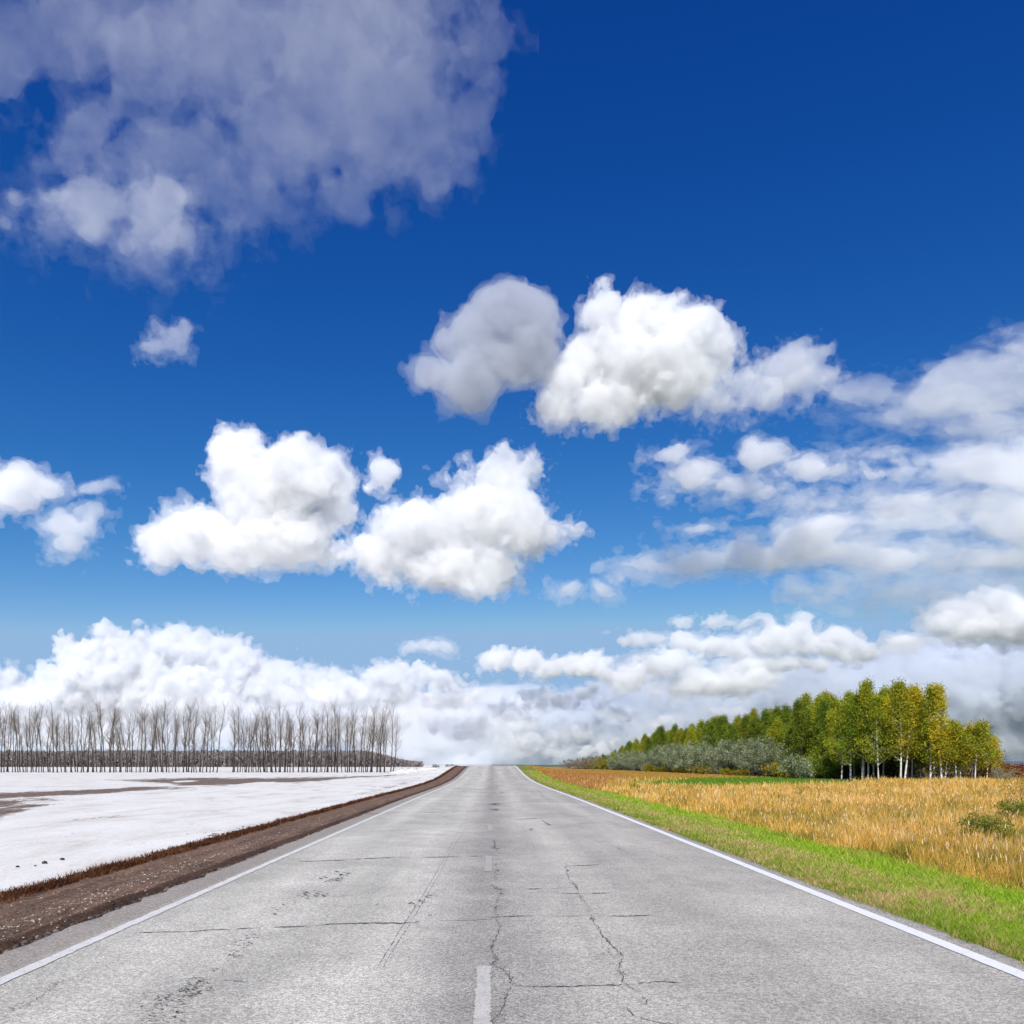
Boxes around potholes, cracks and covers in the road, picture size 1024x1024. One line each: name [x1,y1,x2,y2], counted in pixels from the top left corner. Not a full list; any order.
crack [135,787,687,1024]
